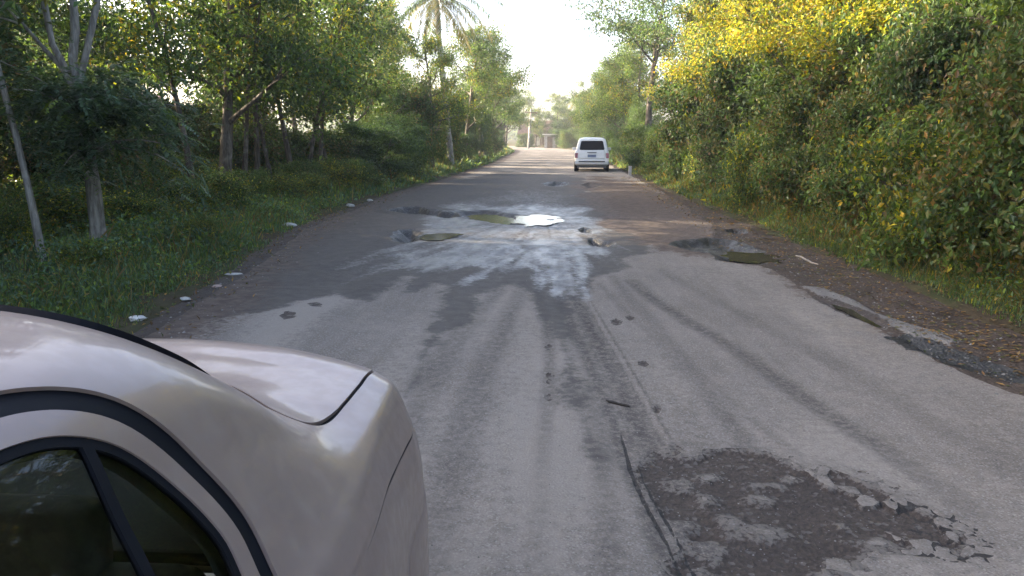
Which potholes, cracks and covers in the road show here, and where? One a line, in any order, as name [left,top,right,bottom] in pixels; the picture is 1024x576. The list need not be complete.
pothole [587,238,616,247]
pothole [884,334,1024,384]
pothole [669,237,780,265]
pothole [390,229,424,243]
pothole [452,210,526,226]
crack [615,421,696,576]
